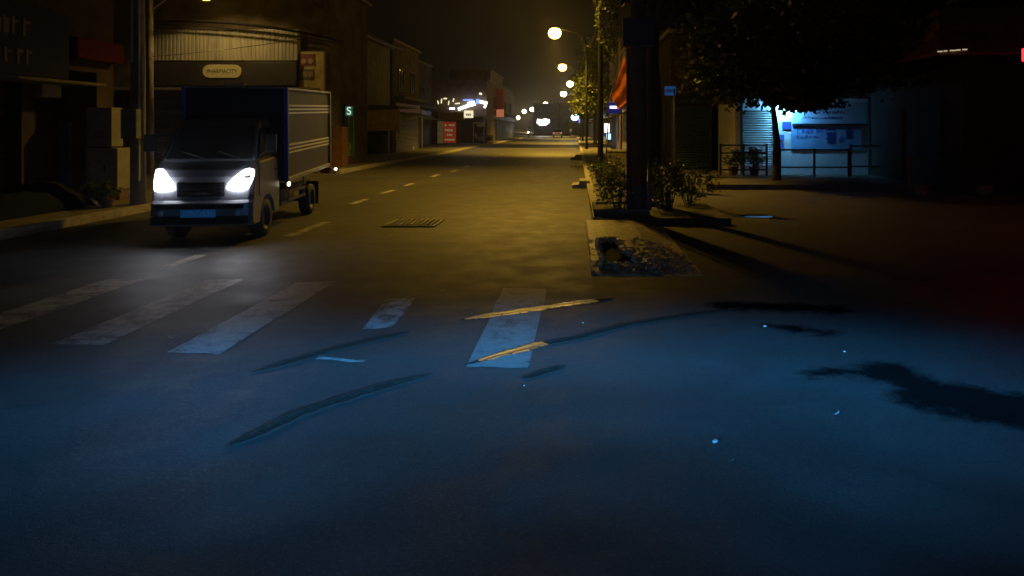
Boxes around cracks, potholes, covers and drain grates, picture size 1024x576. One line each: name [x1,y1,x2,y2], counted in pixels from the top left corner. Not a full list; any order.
crack [460,298,740,379]
crack [229,331,432,446]
